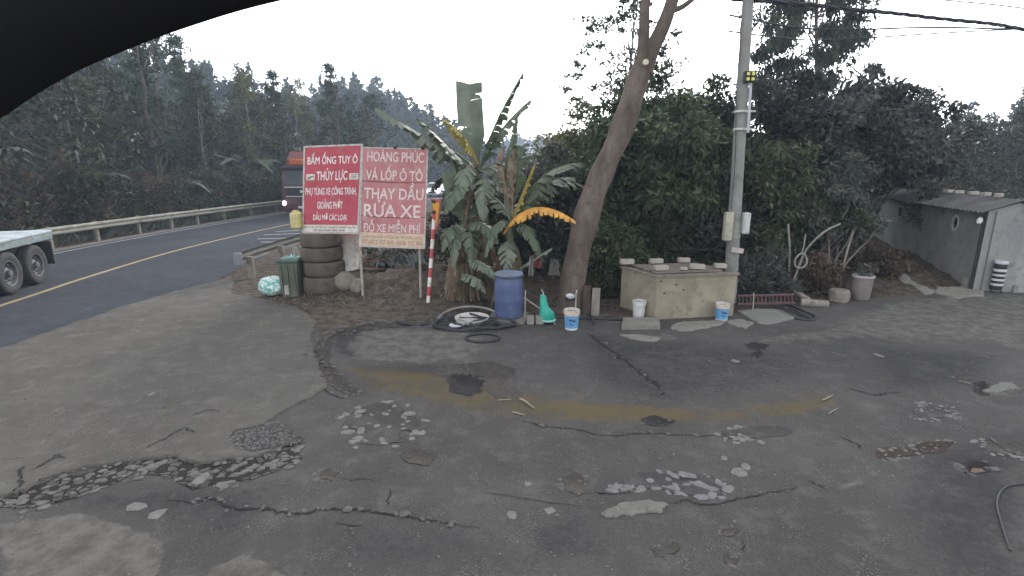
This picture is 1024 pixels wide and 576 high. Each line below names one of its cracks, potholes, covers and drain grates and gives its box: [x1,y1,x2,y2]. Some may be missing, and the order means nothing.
pothole [596,469,734,500]
pothole [337,400,431,449]
crack [587,333,664,395]
pothole [119,444,306,491]
crack [164,476,480,530]
pothole [640,415,677,427]
pothole [744,342,769,350]
pothole [971,381,990,396]
crack [10,454,66,498]
pothole [0,460,143,515]
pothole [875,439,956,461]
